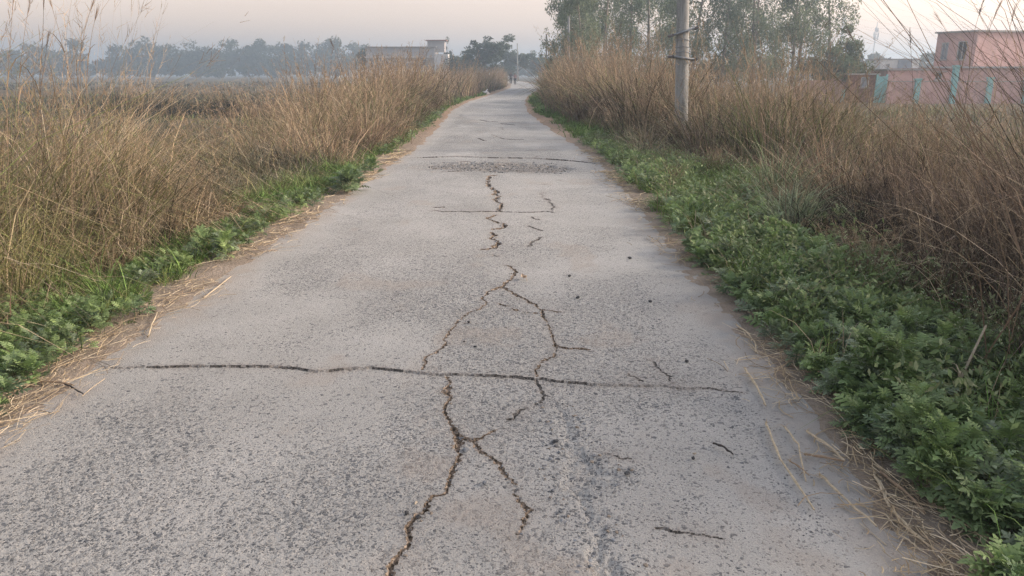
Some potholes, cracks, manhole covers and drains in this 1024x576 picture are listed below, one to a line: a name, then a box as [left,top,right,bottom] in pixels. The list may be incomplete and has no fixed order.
crack [146,175,743,576]
